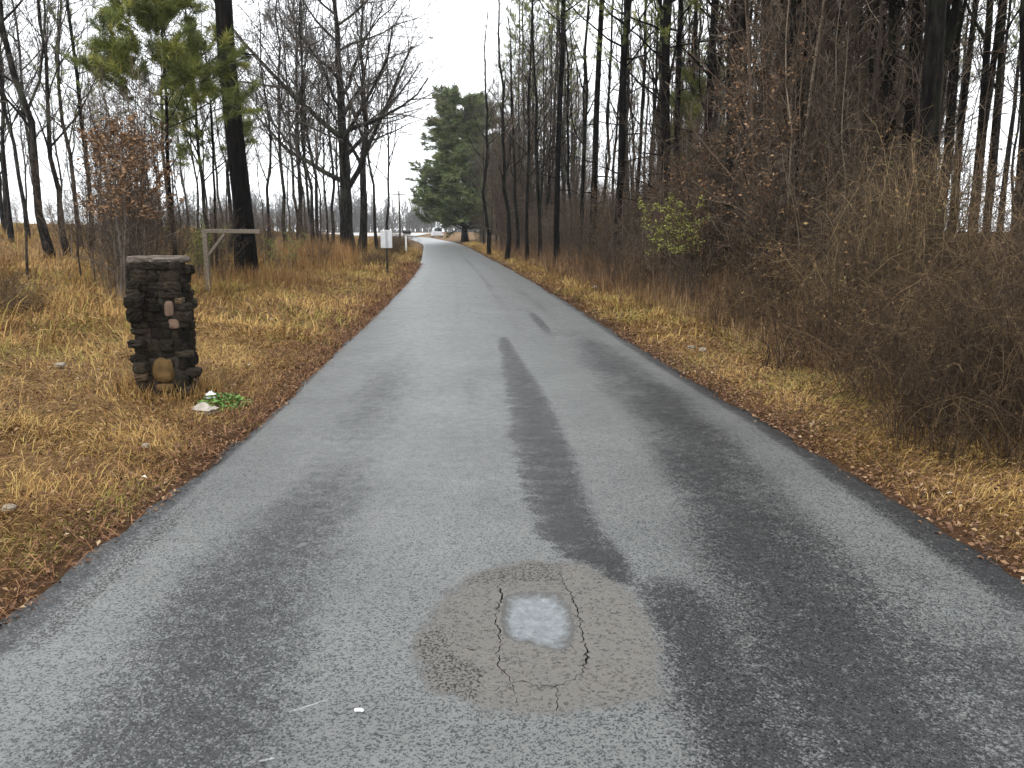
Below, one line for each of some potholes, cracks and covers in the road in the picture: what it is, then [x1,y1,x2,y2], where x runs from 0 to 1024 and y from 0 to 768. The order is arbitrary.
crack [494,570,590,711]
pothole [500,591,576,651]
